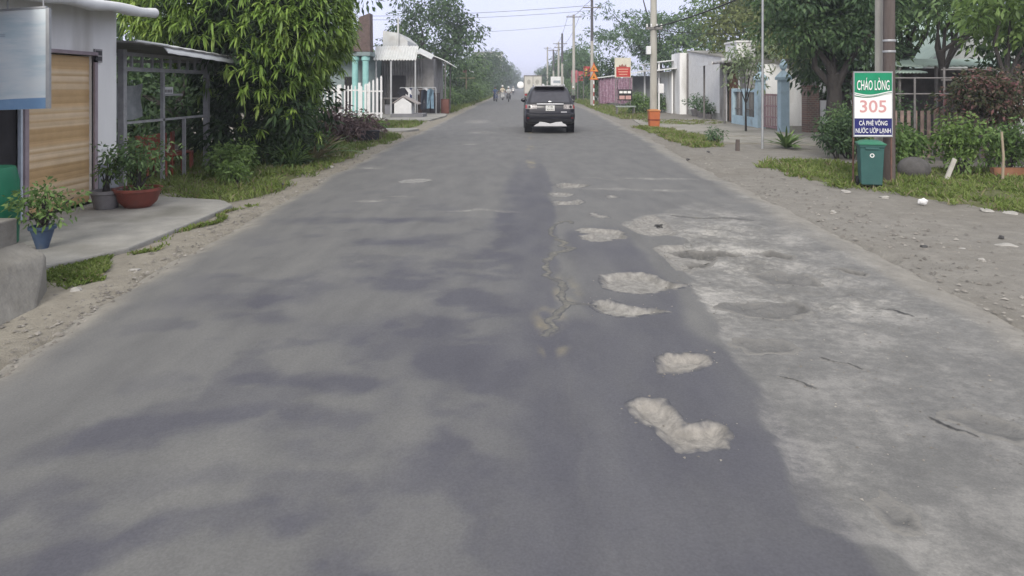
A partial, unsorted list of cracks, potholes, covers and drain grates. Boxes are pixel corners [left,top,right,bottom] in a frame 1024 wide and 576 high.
pothole [669,250,745,262]
crack [927,416,981,439]
crack [875,309,915,317]
pothole [598,271,692,295]
crack [778,357,868,390]
pothole [654,352,714,375]
pothole [713,301,818,321]
crack [539,220,597,337]
pothole [624,396,734,454]
pothole [575,227,629,242]
pothole [652,245,719,273]
